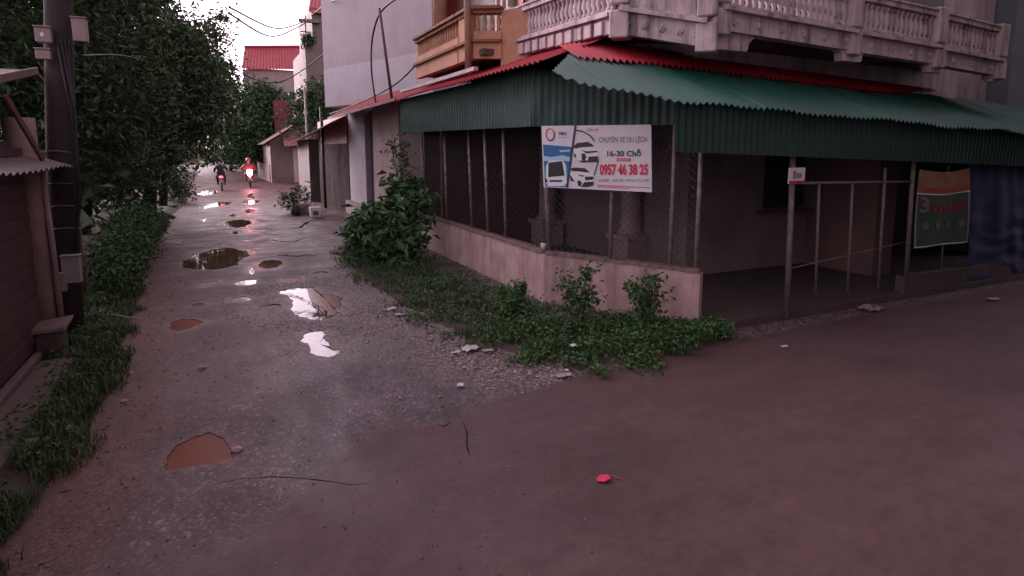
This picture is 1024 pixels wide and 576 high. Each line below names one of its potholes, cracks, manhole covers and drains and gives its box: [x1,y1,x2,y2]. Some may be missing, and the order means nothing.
pothole [279,287,343,320]
pothole [300,330,341,357]
pothole [181,247,250,270]
pothole [165,432,233,470]
pothole [223,219,252,228]
pothole [259,260,282,269]
crack [213,476,369,485]
pothole [169,319,203,331]
crack [438,423,471,456]
